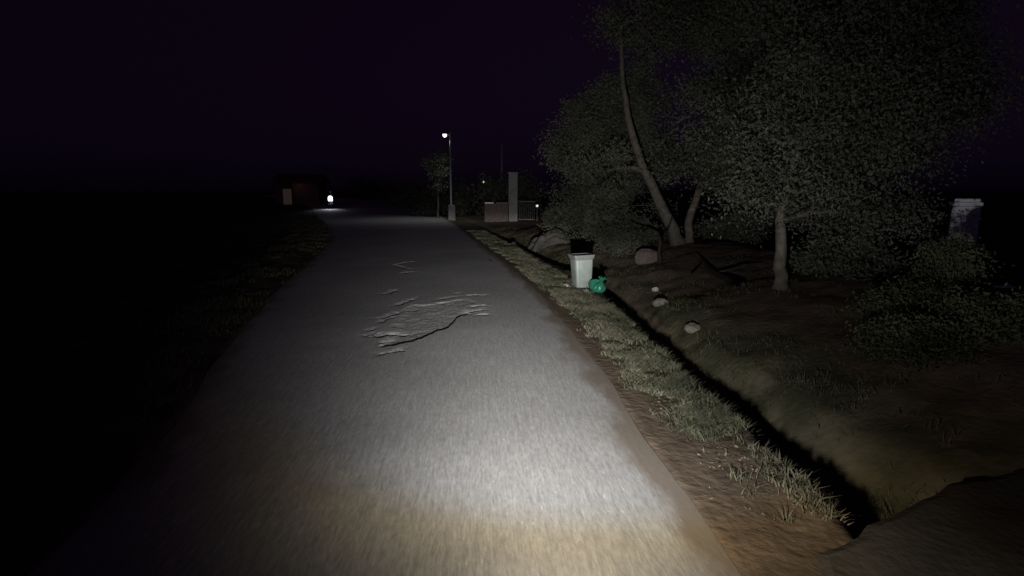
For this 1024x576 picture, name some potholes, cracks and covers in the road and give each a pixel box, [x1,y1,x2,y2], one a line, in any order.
pothole [350,291,478,359]
crack [373,261,424,295]
